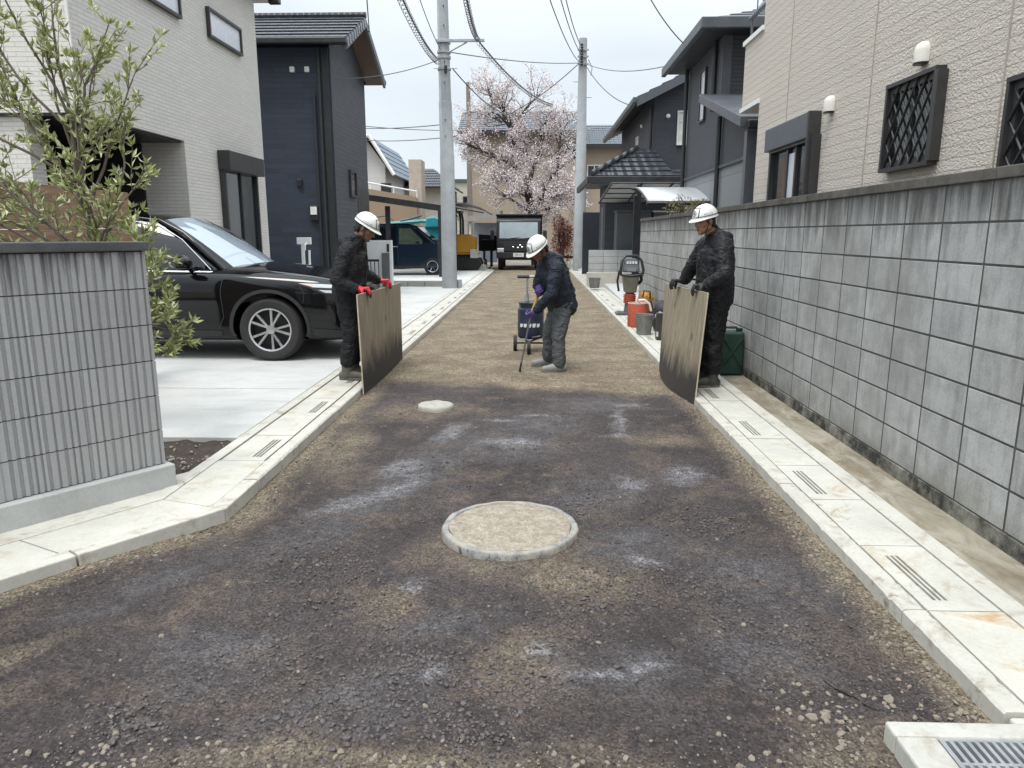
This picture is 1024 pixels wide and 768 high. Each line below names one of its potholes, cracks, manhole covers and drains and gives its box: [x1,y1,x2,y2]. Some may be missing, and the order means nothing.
manhole cover [418,400,454,413]
manhole cover [441,501,579,562]
crack [823,680,896,719]
drain grate [883,721,1024,768]
